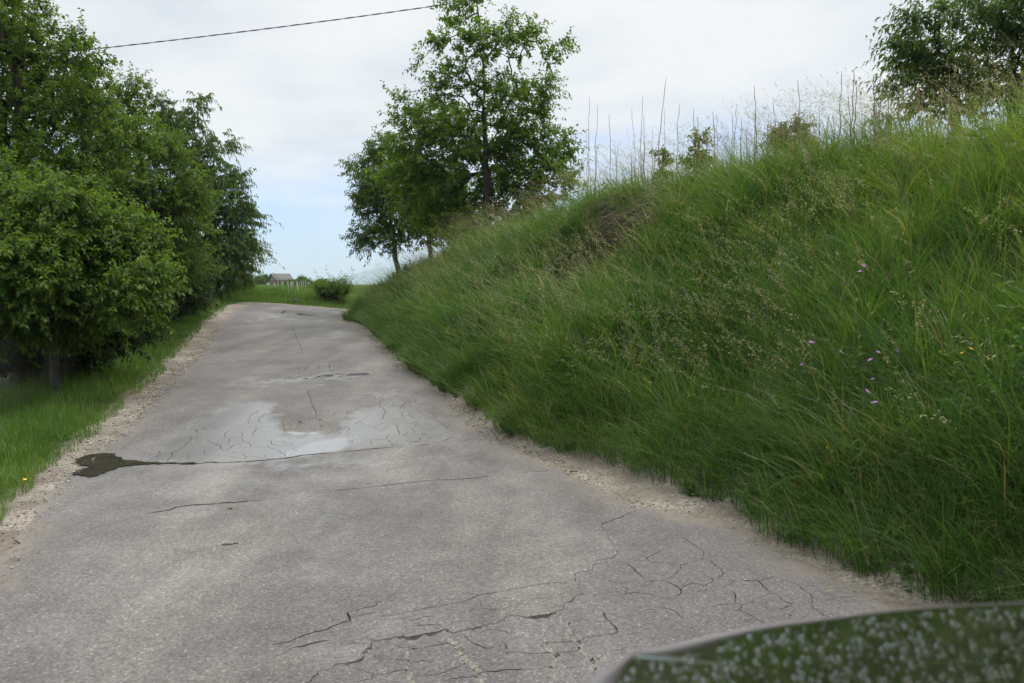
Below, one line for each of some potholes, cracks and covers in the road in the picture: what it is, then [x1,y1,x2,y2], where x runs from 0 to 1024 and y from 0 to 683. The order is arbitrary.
crack [98,497,283,527]
crack [282,310,346,416]
crack [157,397,491,464]
crack [343,470,550,490]
crack [270,509,830,683]
